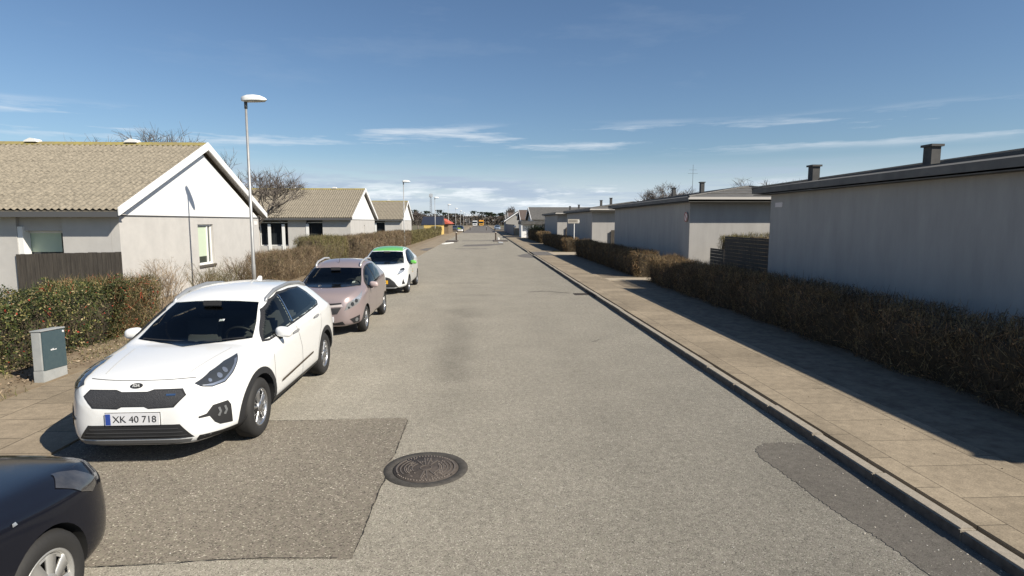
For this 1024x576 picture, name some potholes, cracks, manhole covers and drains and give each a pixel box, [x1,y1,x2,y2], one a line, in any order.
manhole cover [383,452,468,488]
